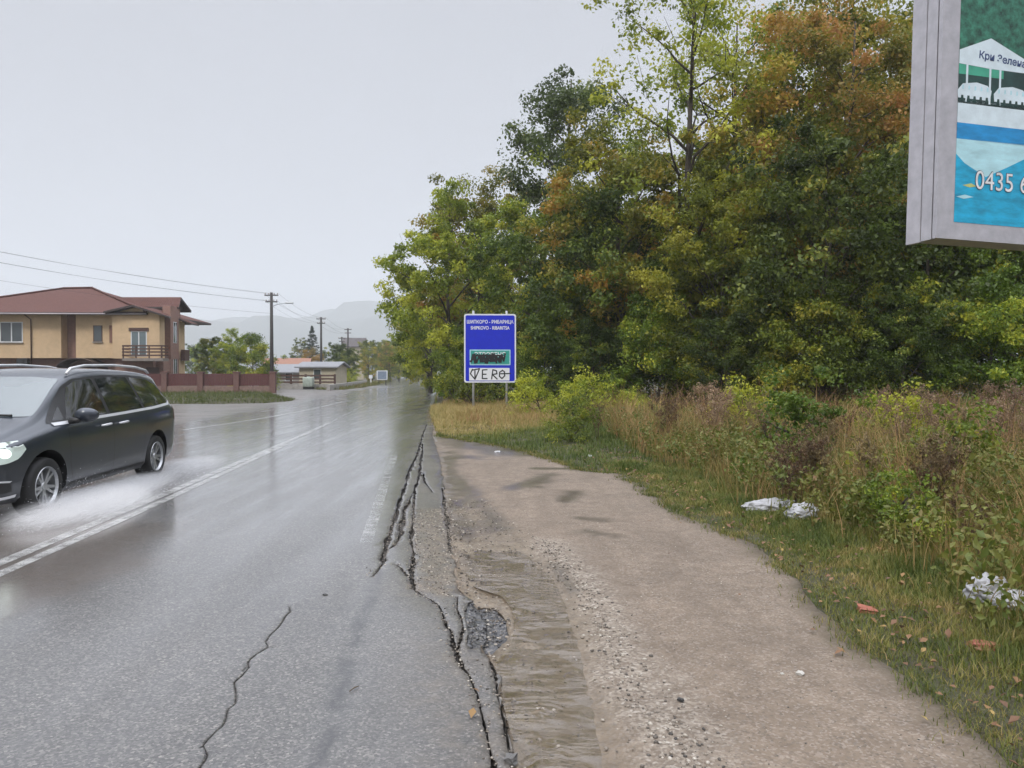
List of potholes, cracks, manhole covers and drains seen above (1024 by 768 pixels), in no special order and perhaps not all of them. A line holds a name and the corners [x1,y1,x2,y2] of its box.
pothole [464,603,508,654]
crack [373,424,497,768]
crack [490,662,510,753]
